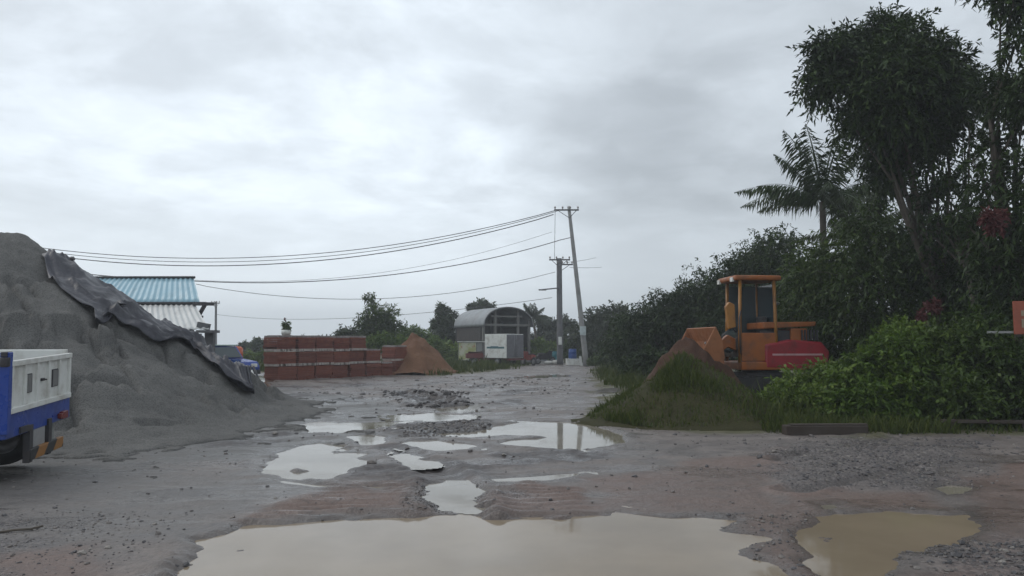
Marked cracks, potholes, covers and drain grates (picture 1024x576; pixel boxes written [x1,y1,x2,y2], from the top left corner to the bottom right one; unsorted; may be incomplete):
pothole [409,419,646,452]
pothole [382,452,445,473]
pothole [293,421,422,436]
pothole [392,436,493,454]
pothole [767,503,1024,576]
pothole [378,411,482,422]
pothole [380,388,463,405]
pothole [220,439,394,480]
